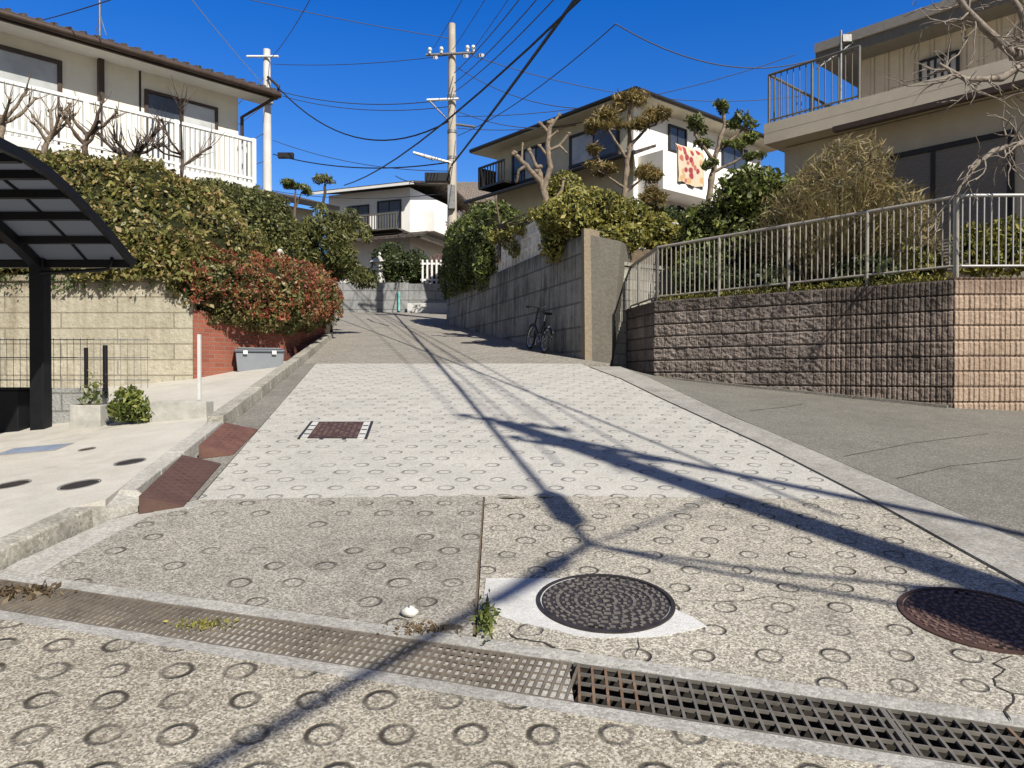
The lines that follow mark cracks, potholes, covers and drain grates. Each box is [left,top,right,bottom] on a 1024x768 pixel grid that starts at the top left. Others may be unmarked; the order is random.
manhole cover [897,587,1024,655]
crack [993,655,1020,721]
manhole cover [297,421,373,440]
manhole cover [536,574,676,634]
crack [509,633,555,648]
